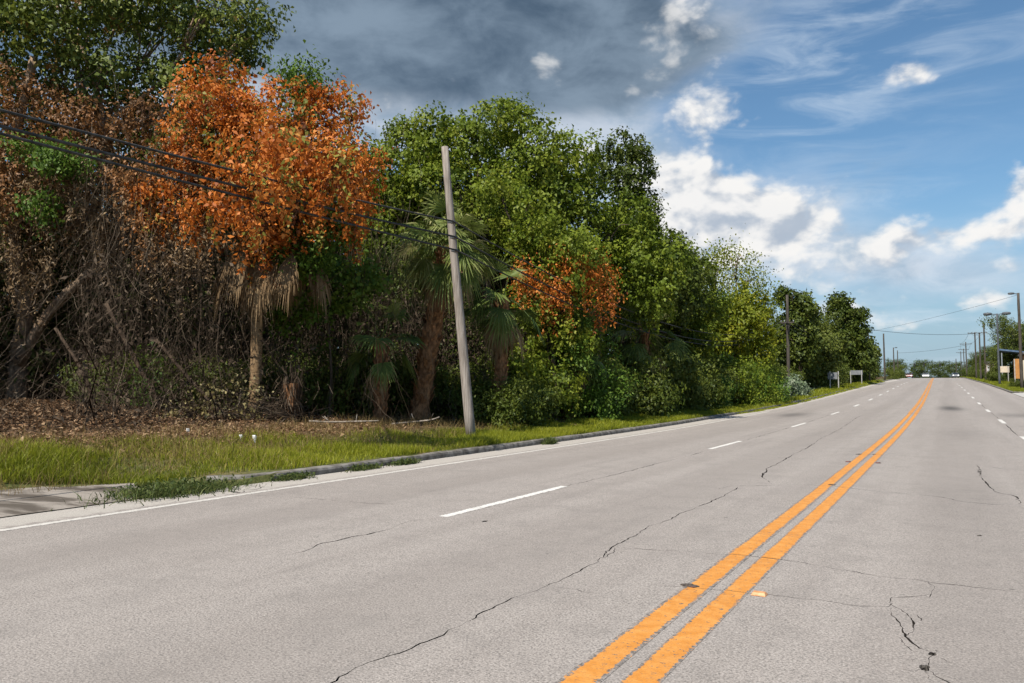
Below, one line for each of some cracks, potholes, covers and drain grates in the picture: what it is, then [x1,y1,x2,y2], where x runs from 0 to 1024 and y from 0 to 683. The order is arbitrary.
crack [331,416,1022,683]
